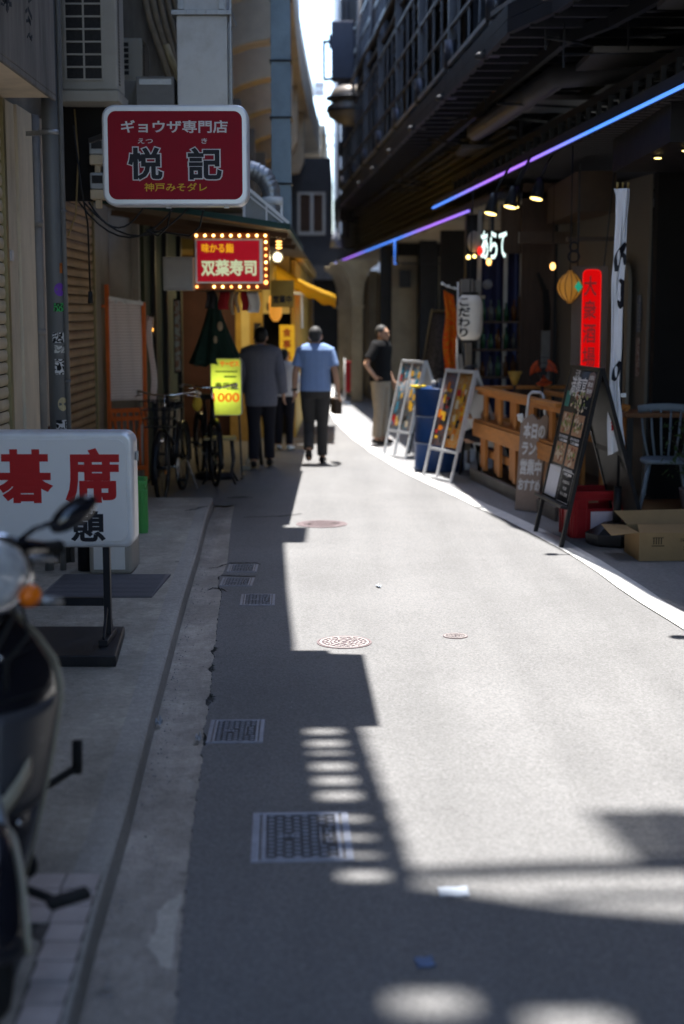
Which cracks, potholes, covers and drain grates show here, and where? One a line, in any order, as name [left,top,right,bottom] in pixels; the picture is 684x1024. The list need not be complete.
crack [208,562,259,592]
manhole cover [317,636,372,649]
manhole cover [296,520,347,528]
